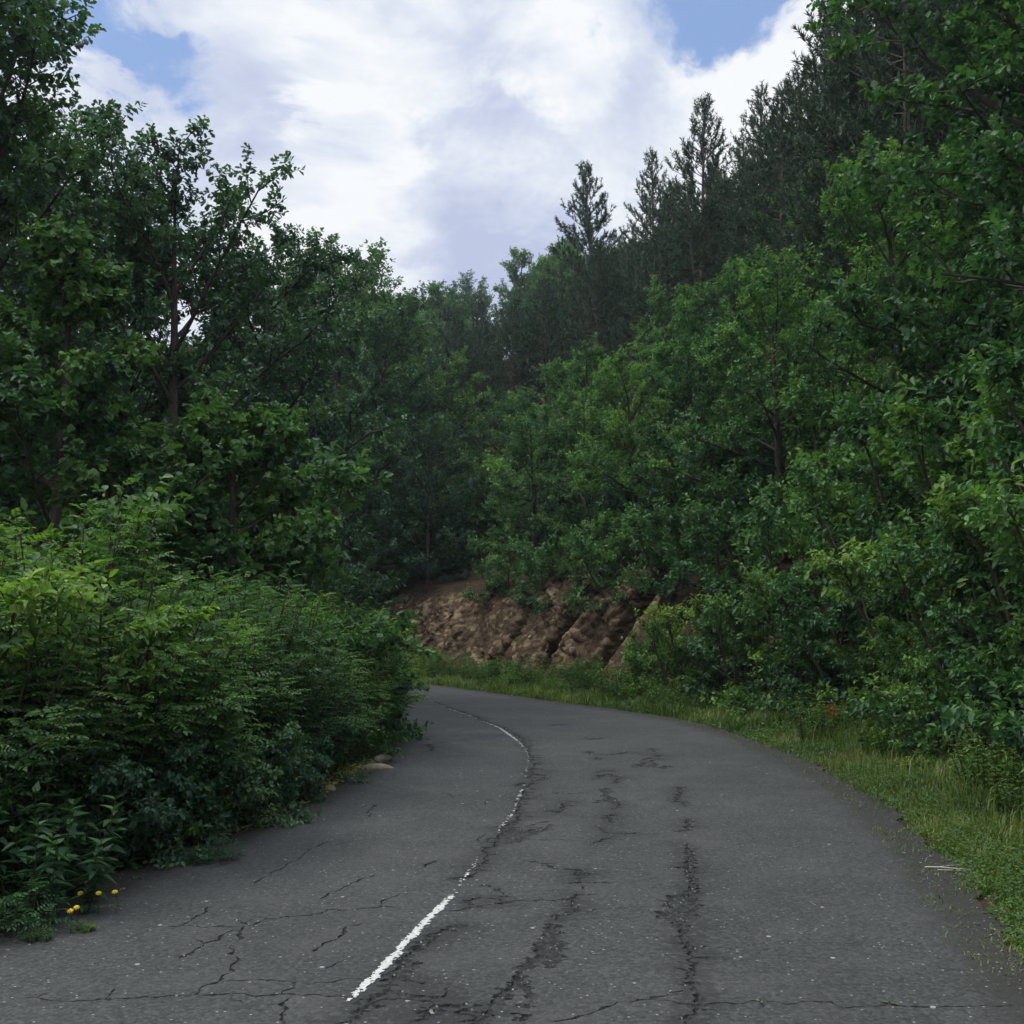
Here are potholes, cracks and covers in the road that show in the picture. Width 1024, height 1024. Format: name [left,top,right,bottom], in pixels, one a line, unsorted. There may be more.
crack [551,786,1014,1024]
crack [17,703,648,1024]
crack [648,748,667,760]
